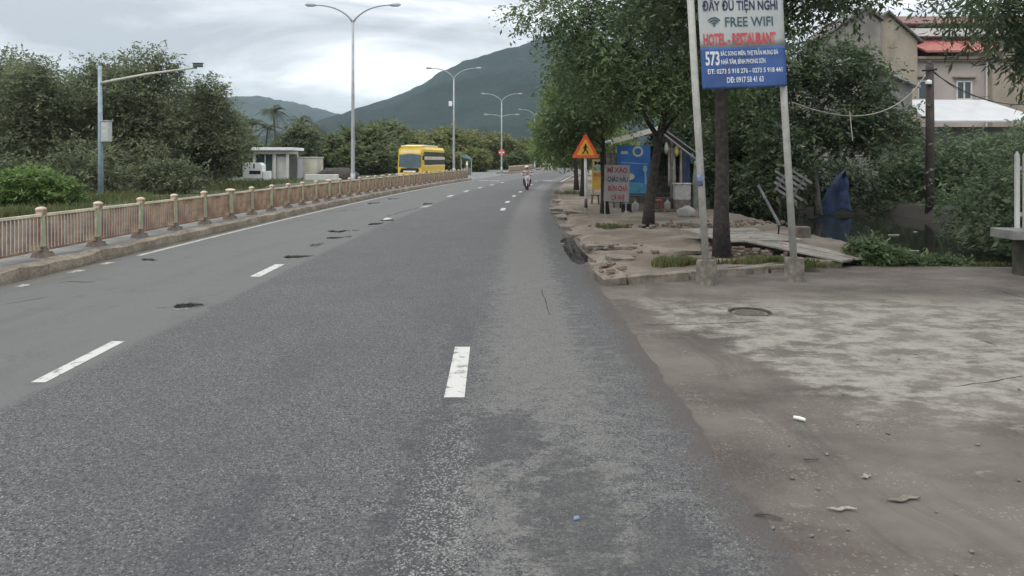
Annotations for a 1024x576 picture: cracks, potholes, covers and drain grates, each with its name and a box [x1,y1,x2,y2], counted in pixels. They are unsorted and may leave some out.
manhole cover [727,307,773,316]
pothole [560,237,588,265]
crack [953,376,1020,387]
pothole [171,302,207,310]
